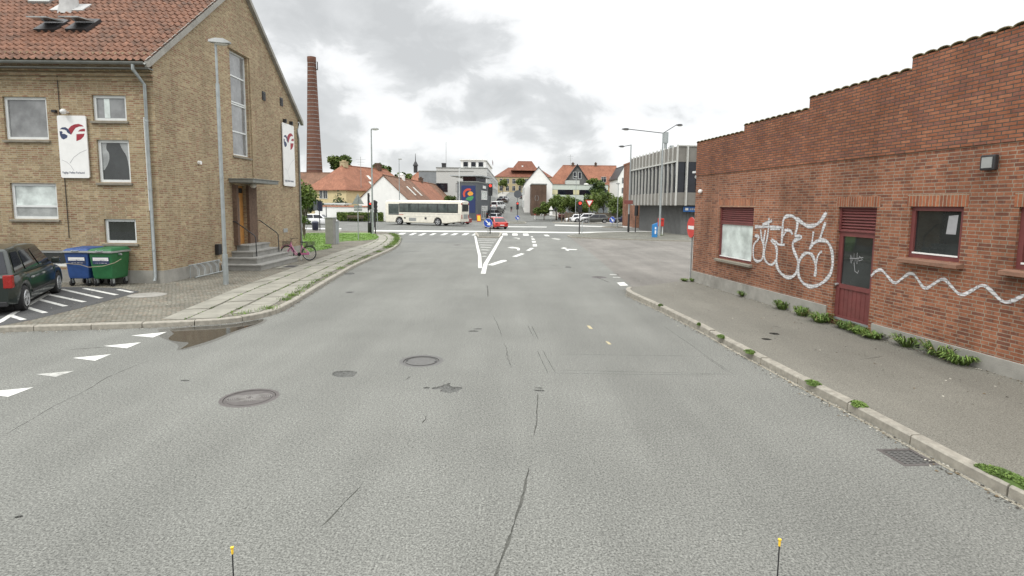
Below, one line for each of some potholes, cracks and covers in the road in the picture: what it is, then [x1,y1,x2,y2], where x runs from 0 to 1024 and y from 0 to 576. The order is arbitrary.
crack [494,395,538,576]
manhole cover [218,389,279,408]
crack [322,487,360,526]
drain grate [876,448,940,466]
manhole cover [399,355,443,367]
